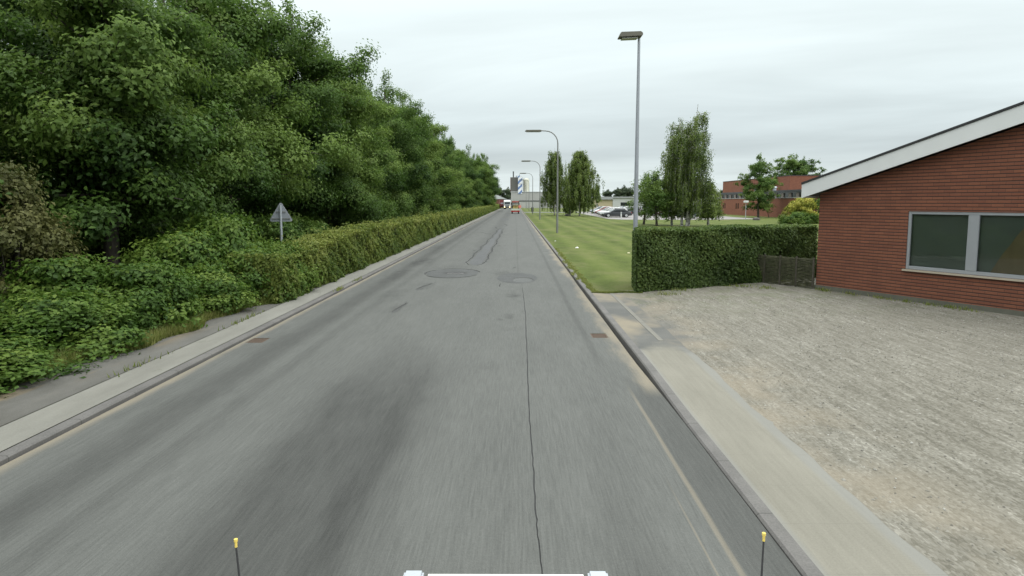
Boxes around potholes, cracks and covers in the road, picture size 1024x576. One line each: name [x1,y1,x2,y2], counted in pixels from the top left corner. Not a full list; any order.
crack [522,289,543,574]
crack [465,224,515,287]
